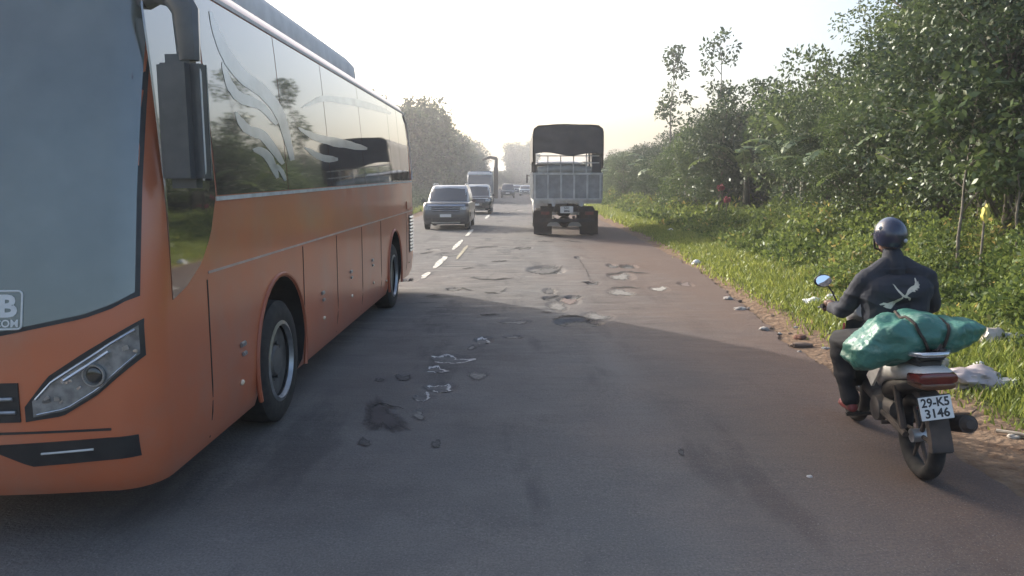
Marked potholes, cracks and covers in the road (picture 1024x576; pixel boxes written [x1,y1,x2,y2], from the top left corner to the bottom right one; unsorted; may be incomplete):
pothole [366,400,405,430]
pothole [529,265,558,274]
pothole [431,354,476,363]
pothole [424,384,451,393]
